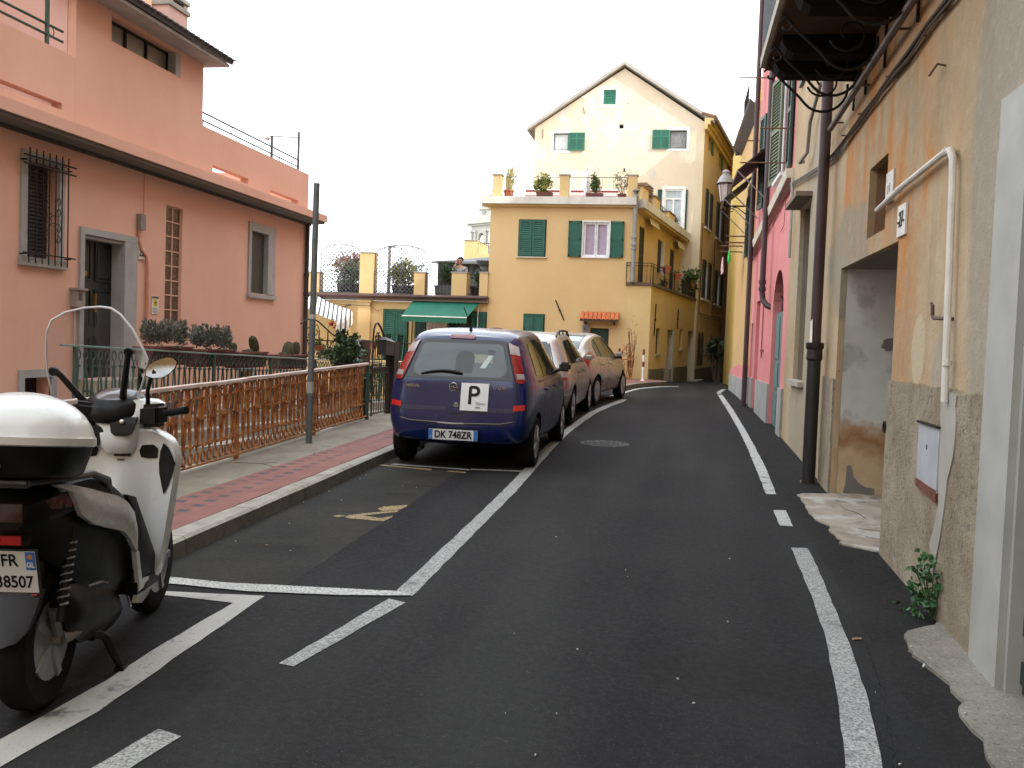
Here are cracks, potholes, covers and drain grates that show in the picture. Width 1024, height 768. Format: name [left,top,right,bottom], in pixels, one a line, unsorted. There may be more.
crack [860,634,896,768]
